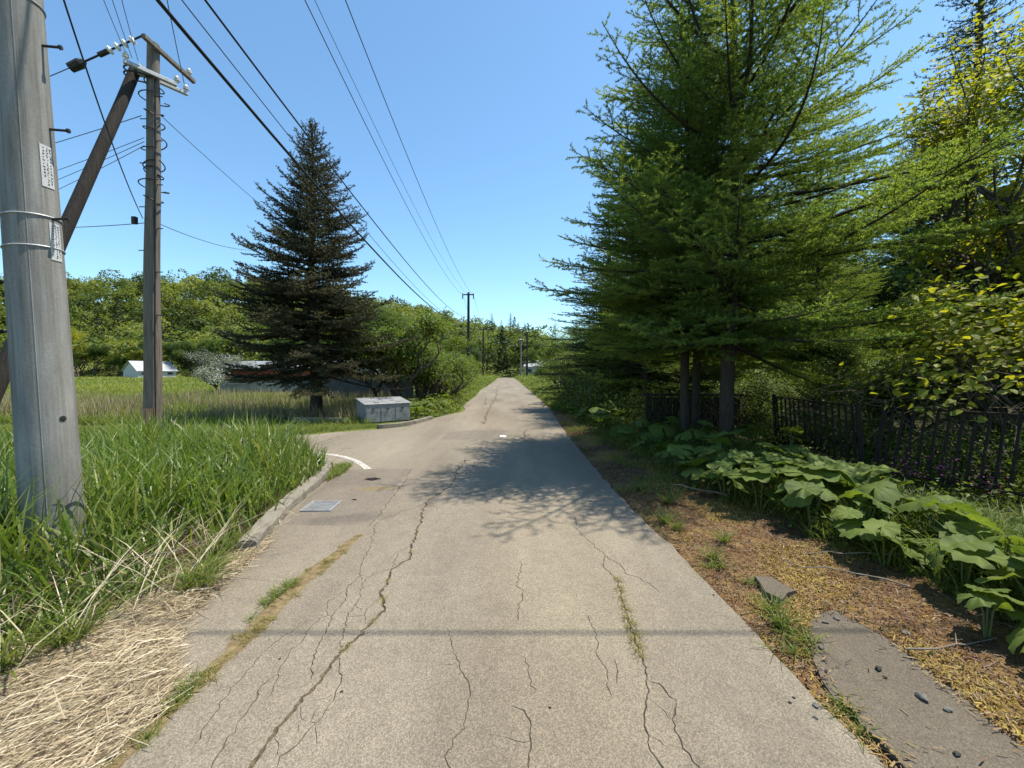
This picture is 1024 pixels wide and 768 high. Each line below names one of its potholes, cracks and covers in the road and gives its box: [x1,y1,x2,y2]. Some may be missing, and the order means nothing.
crack [500,658,537,768]
crack [574,517,700,768]
crack [481,384,500,424]
drain grate [299,501,342,512]
crack [193,460,478,768]
